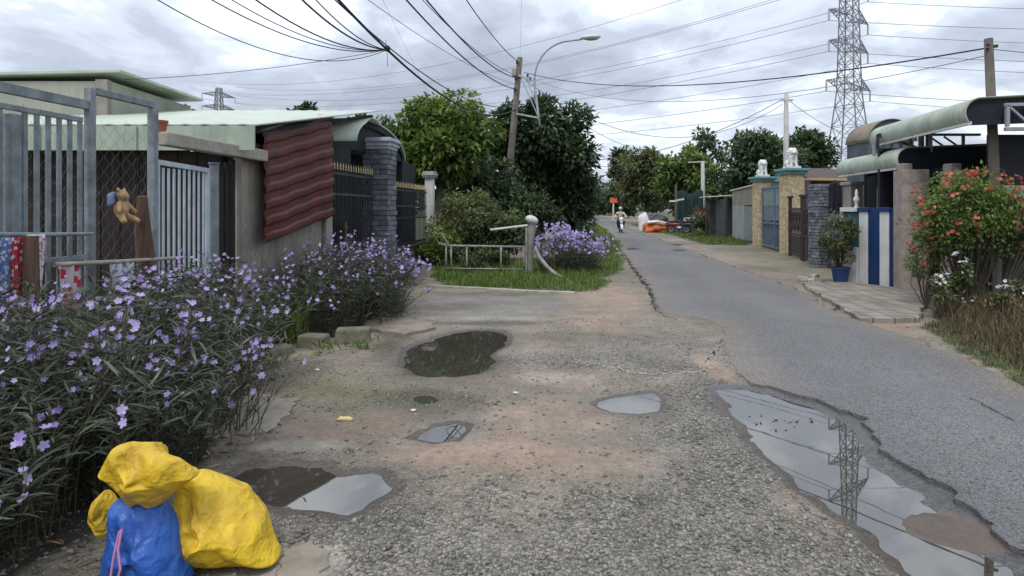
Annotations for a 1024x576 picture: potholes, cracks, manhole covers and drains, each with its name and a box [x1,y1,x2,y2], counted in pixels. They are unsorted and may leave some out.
pothole [403,420,474,444]
pothole [705,383,1024,576]
pothole [409,392,445,404]
crack [627,259,660,317]
pothole [396,329,515,378]
pothole [224,459,408,522]
pothole [588,389,669,416]
